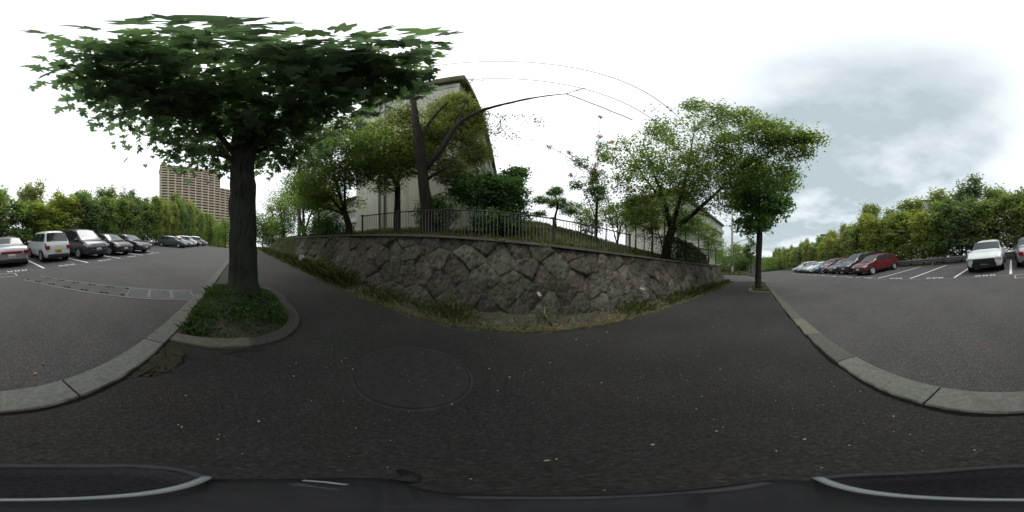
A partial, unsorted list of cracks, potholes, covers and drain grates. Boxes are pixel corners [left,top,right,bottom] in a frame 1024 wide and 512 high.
drain grate [125,288,150,298]
manhole cover [351,347,473,411]
drain grate [149,289,172,299]
drain grate [171,290,193,299]
